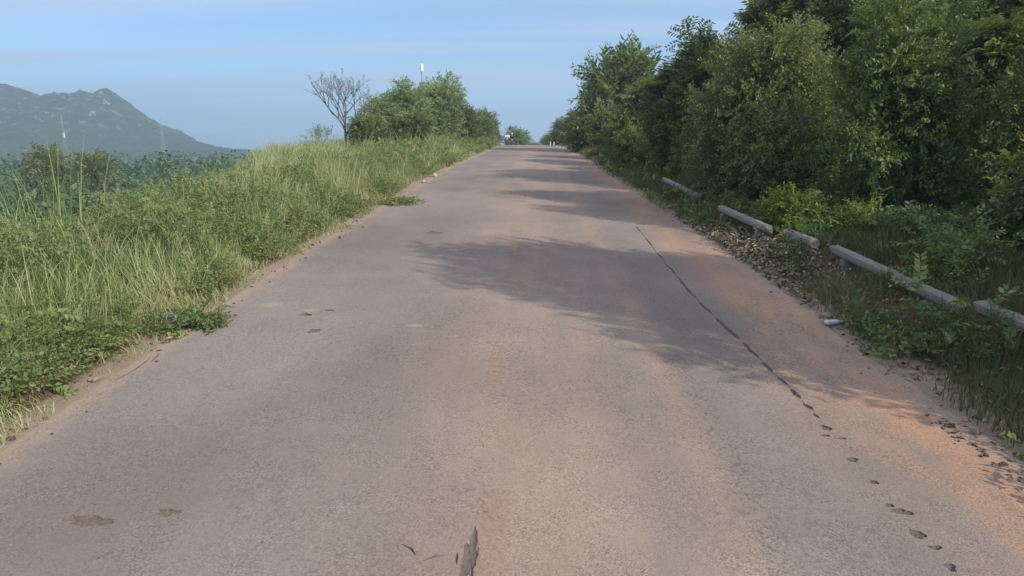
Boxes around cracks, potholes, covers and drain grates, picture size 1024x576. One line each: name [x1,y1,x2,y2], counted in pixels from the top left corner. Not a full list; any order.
pothole [157,509,181,517]
crack [402,544,458,564]
crack [636,227,957,572]
pothole [68,515,114,527]
